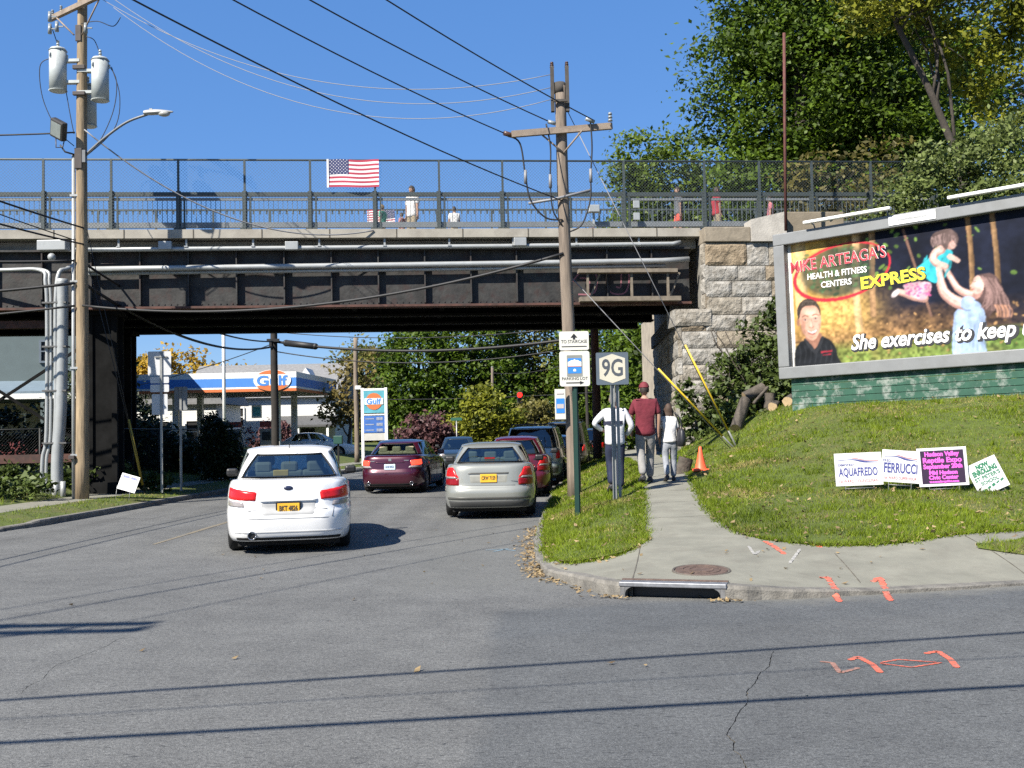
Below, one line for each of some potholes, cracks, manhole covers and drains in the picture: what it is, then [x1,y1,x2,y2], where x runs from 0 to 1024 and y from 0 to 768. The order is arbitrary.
crack [726,651,774,768]
manhole cover [672,564,731,576]
drain grate [619,578,729,601]
